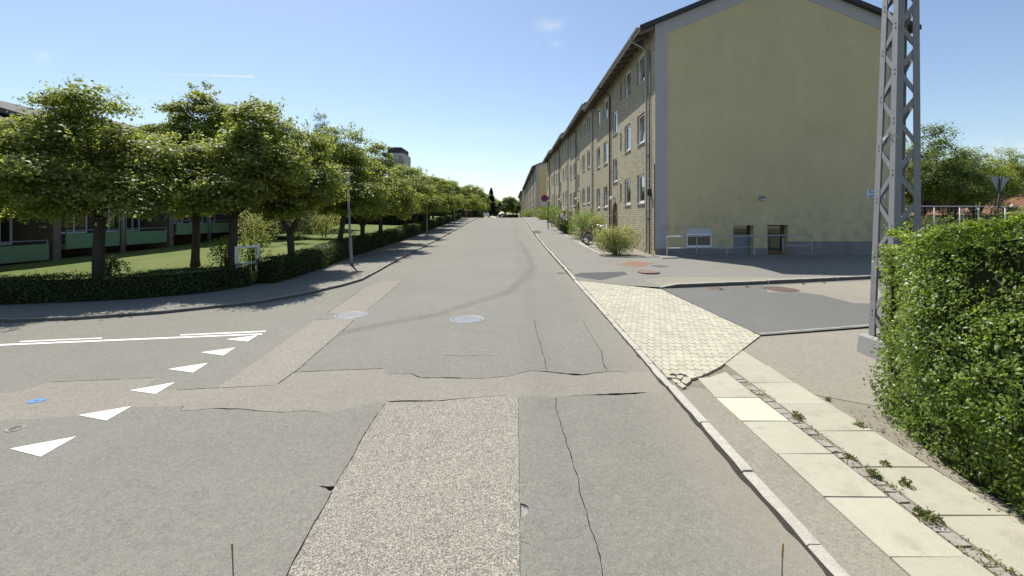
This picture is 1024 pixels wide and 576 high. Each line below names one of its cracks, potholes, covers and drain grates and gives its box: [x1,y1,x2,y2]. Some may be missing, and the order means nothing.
manhole cover [450,315,484,323]
crack [555,399,603,576]
crack [412,320,628,379]
manhole cover [334,311,368,319]
